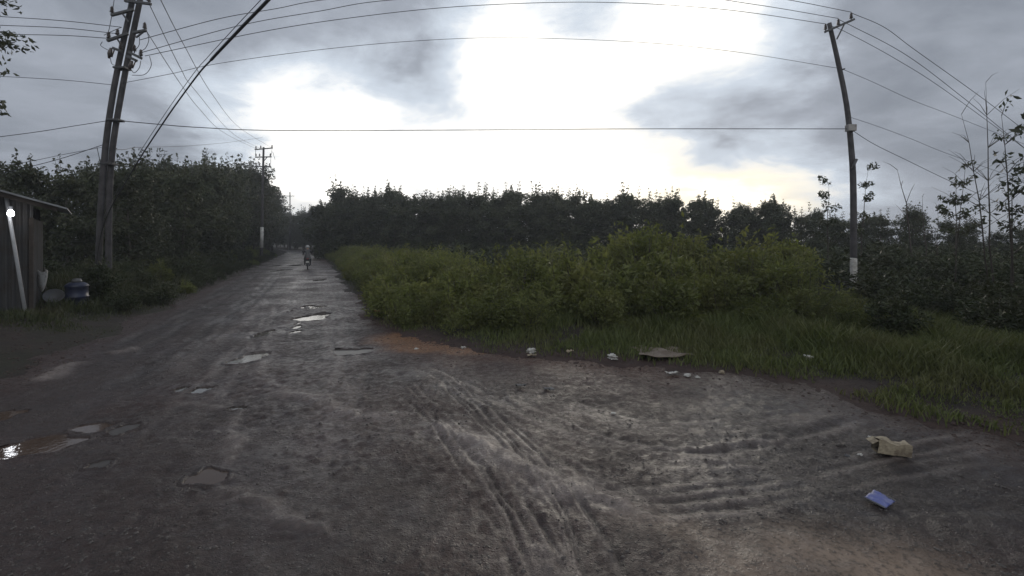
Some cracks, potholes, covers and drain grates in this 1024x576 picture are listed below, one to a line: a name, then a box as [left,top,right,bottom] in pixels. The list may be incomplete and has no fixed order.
pothole [0,407,38,422]
pothole [250,329,279,338]
pothole [167,385,196,395]
pothole [101,421,147,437]
pothole [286,311,333,323]
pothole [221,350,273,366]
pothole [184,385,219,395]
pothole [176,465,236,489]
pothole [0,431,97,460]
pothole [328,347,378,356]
pothole [63,420,122,435]
pothole [78,455,120,472]
